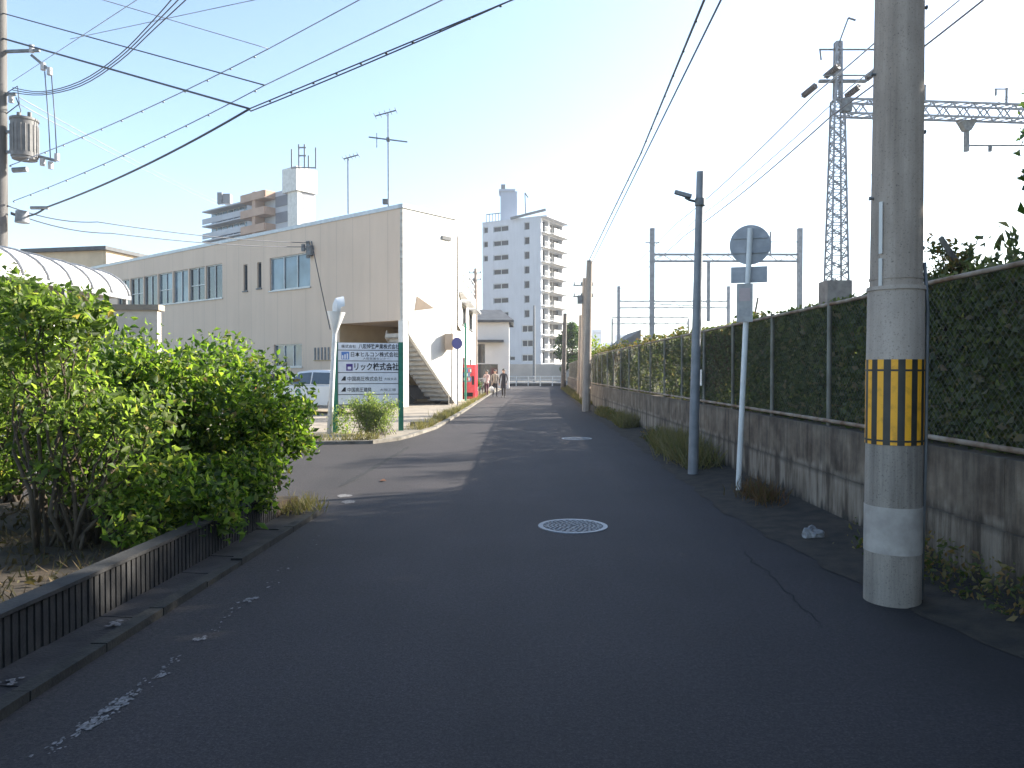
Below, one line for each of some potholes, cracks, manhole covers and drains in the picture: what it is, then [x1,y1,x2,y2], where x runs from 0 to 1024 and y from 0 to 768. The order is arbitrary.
manhole cover [538,519,608,534]
crack [746,554,822,627]
